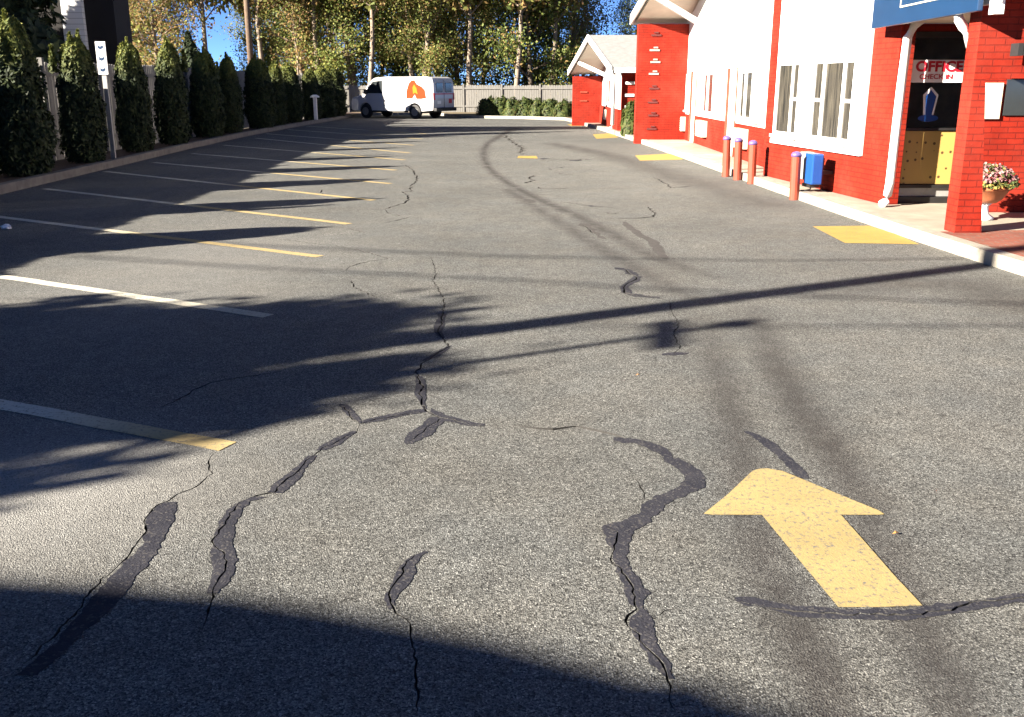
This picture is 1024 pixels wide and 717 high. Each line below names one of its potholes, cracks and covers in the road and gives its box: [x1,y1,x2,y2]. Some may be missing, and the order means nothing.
crack [15,452,216,675]
crack [503,134,657,219]
crack [370,163,419,223]
